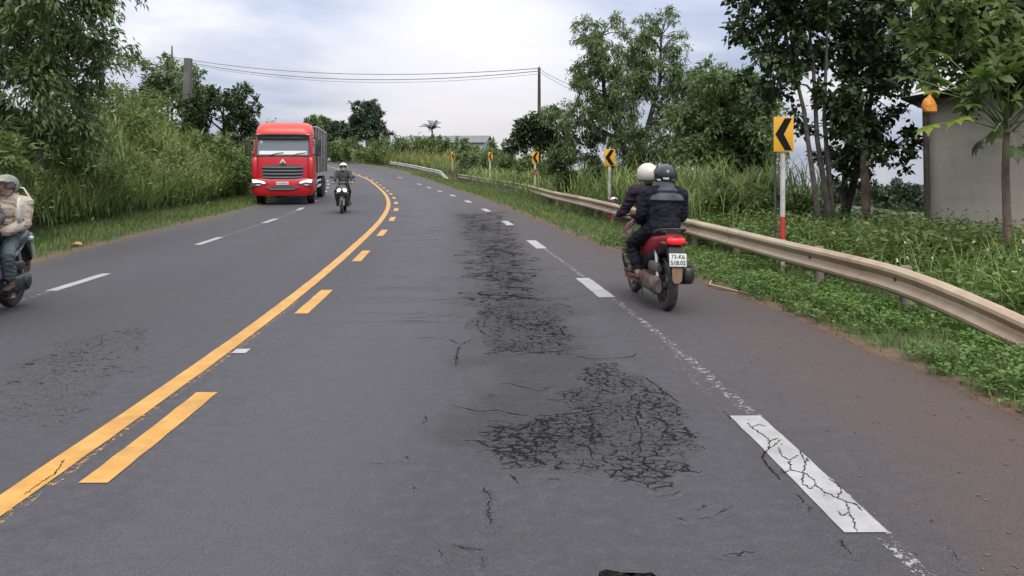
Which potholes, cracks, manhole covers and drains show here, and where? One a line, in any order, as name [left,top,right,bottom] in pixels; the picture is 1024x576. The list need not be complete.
crack [0,321,180,439]
crack [364,211,862,576]
